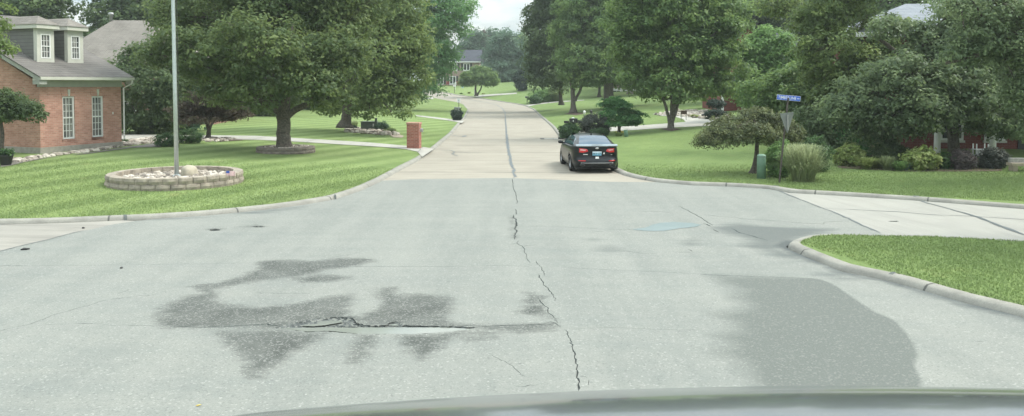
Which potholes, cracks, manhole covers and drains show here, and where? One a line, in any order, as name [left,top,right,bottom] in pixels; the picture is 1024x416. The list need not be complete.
crack [512,179,589,391]
crack [650,208,834,241]
